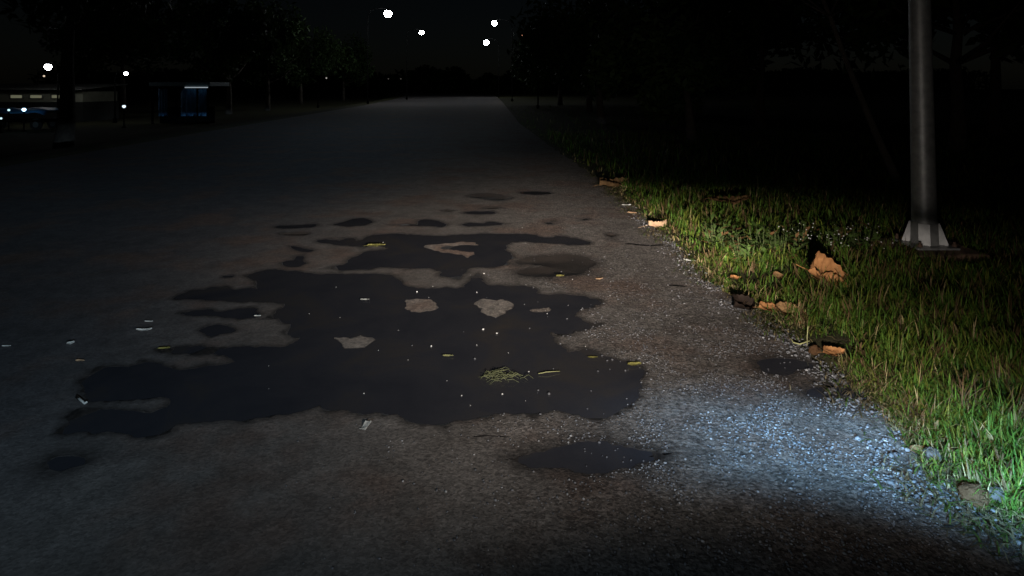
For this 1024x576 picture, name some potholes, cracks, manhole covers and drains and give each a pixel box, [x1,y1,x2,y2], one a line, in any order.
pothole [282,256,307,267]
pothole [316,233,592,280]
pothole [55,269,647,439]
pothole [756,358,816,376]
pothole [510,440,668,474]
